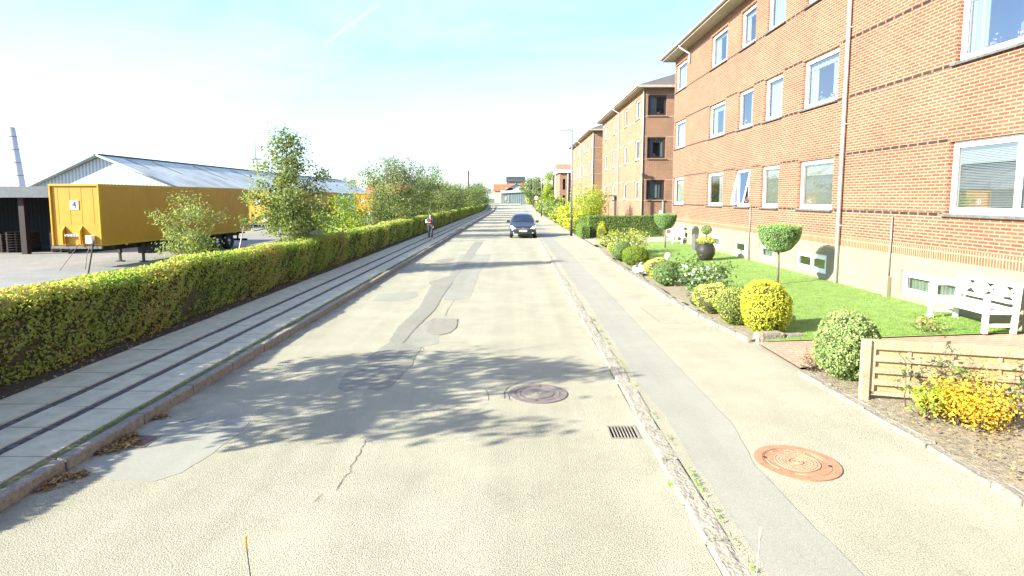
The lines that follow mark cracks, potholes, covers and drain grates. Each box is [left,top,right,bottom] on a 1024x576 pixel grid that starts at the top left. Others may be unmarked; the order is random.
manhole cover [509,384,567,404]
manhole cover [754,445,842,482]
drain grate [606,425,642,439]
